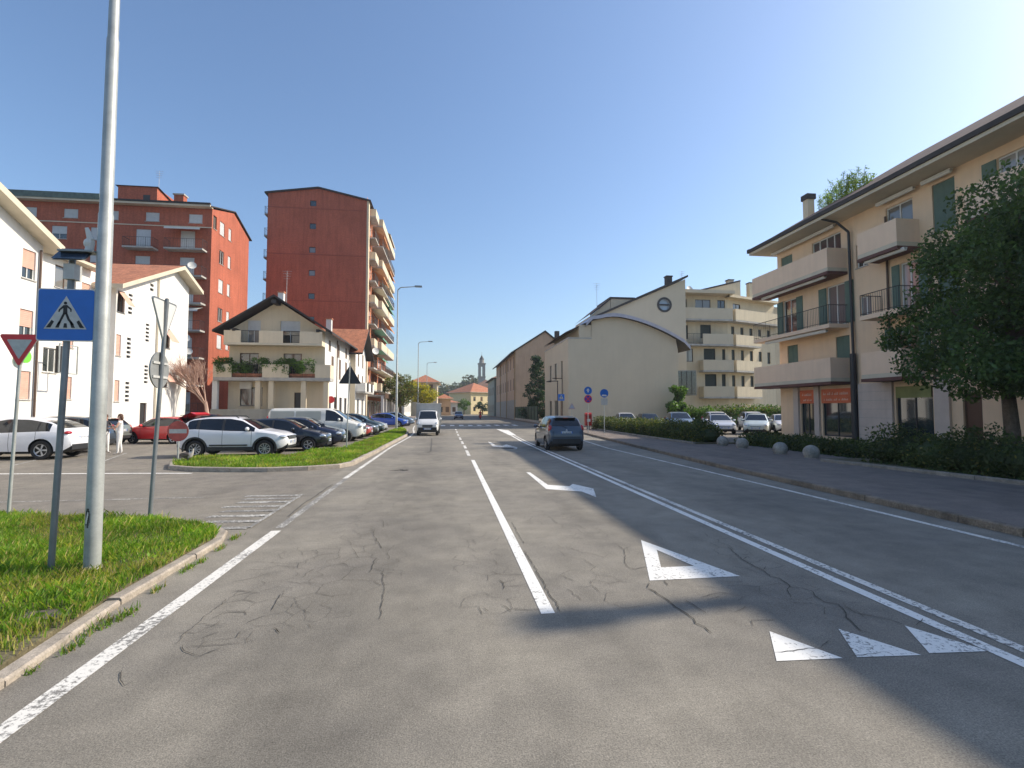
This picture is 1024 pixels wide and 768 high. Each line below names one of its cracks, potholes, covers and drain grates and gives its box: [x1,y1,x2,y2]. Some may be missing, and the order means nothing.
crack [455,504,902,652]
crack [179,493,419,656]
